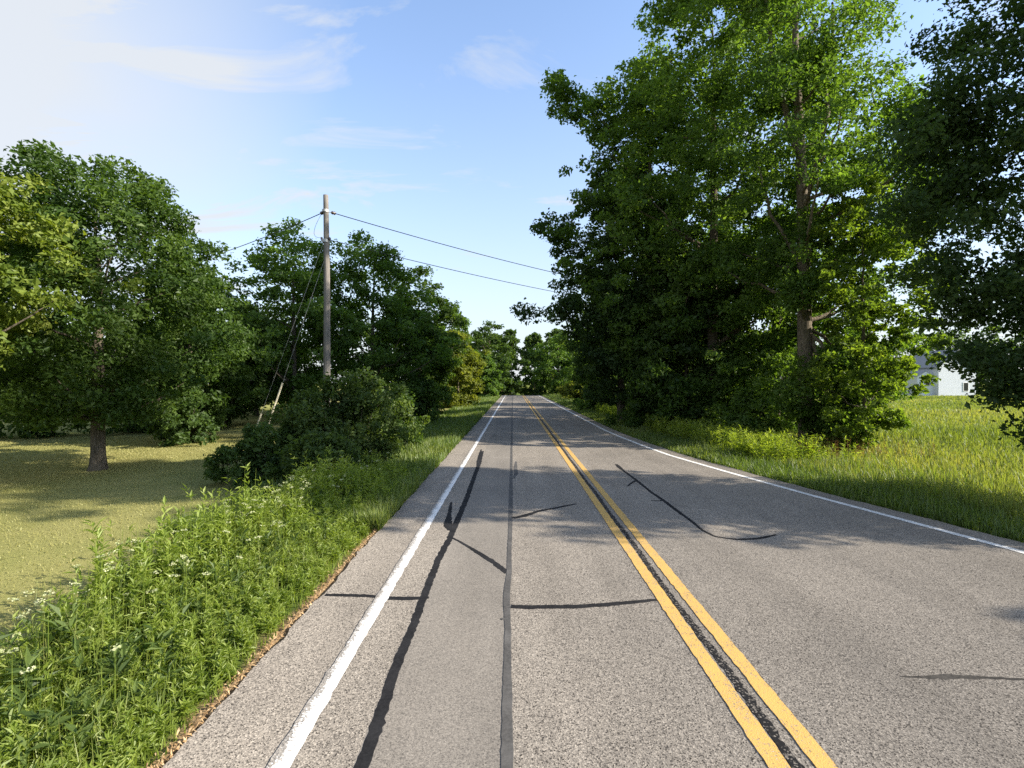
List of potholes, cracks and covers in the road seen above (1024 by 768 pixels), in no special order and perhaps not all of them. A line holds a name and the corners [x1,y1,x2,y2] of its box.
crack [512,504,575,519]
crack [615,464,776,540]
